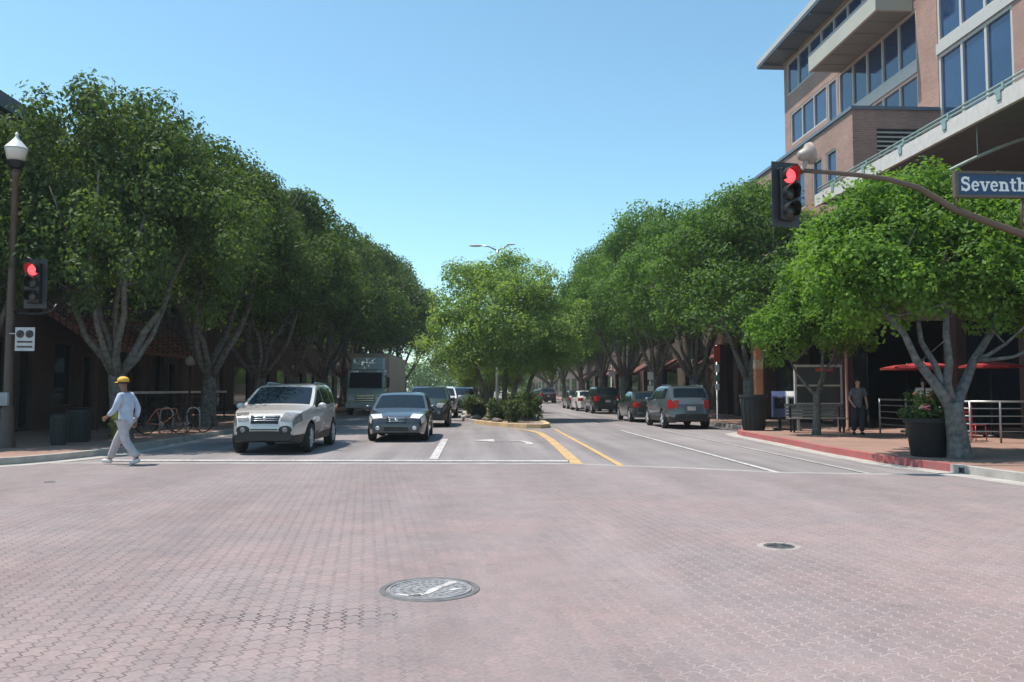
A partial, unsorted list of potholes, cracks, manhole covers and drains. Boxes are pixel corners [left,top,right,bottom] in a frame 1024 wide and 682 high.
manhole cover [379,577,480,602]
manhole cover [757,542,802,551]
